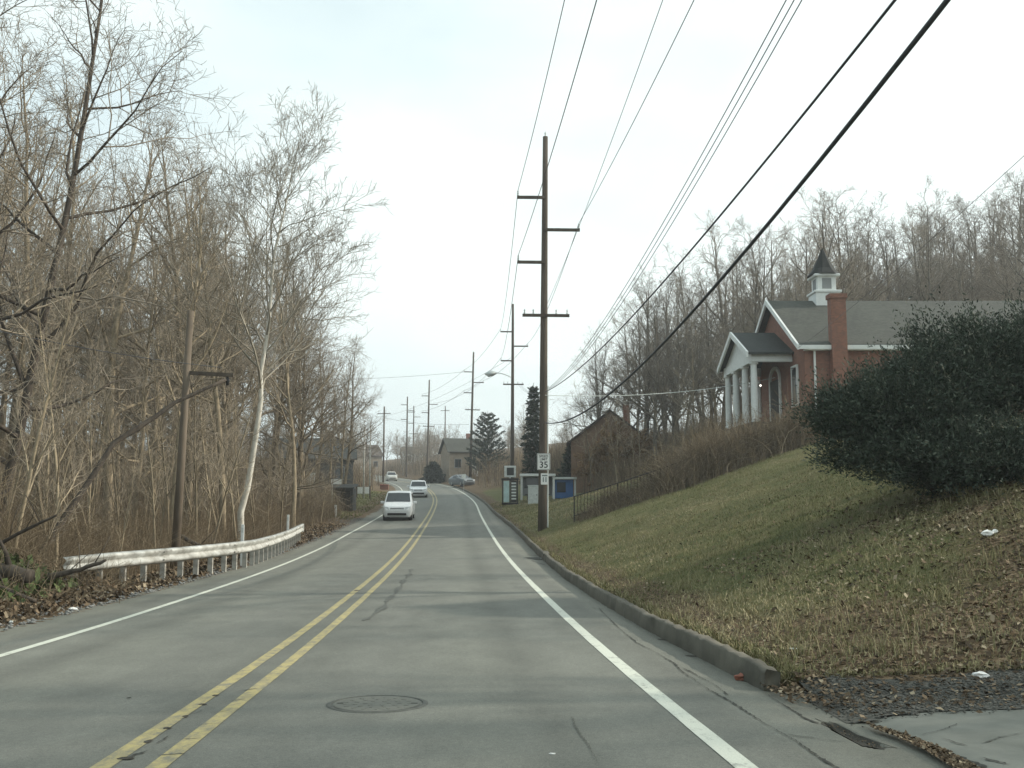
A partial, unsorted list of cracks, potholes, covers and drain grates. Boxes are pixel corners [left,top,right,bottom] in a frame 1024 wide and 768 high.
manhole cover [326,695,428,713]
